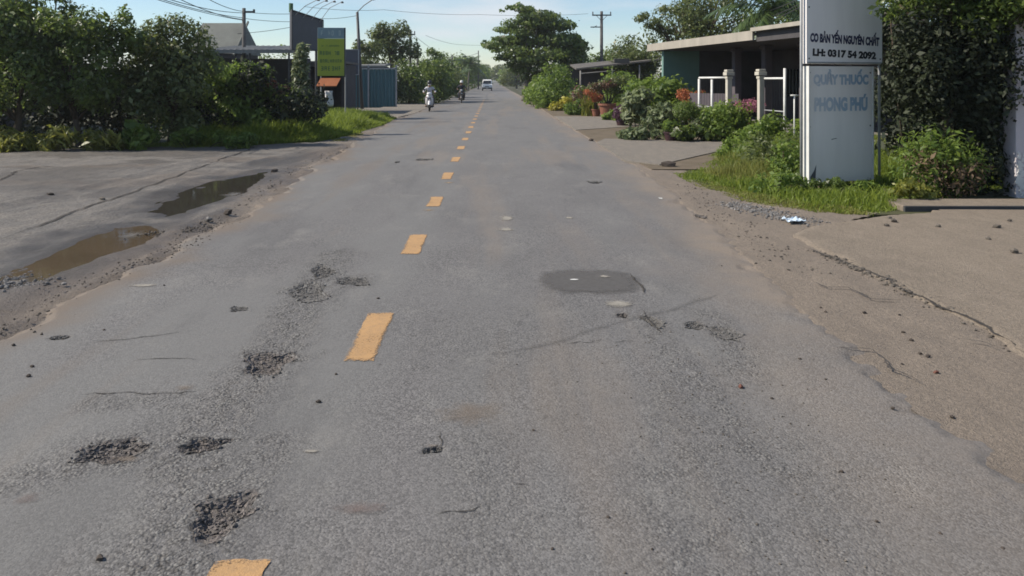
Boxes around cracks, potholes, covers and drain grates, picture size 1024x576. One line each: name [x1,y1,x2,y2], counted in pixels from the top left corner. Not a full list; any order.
pothole [333,277,370,286]
pothole [190,489,261,544]
crack [810,248,1016,347]
pothole [243,351,300,377]
pothole [177,436,233,454]
pothole [311,264,339,279]
crack [838,346,923,383]
pothole [284,279,331,304]
pothole [67,436,152,466]
